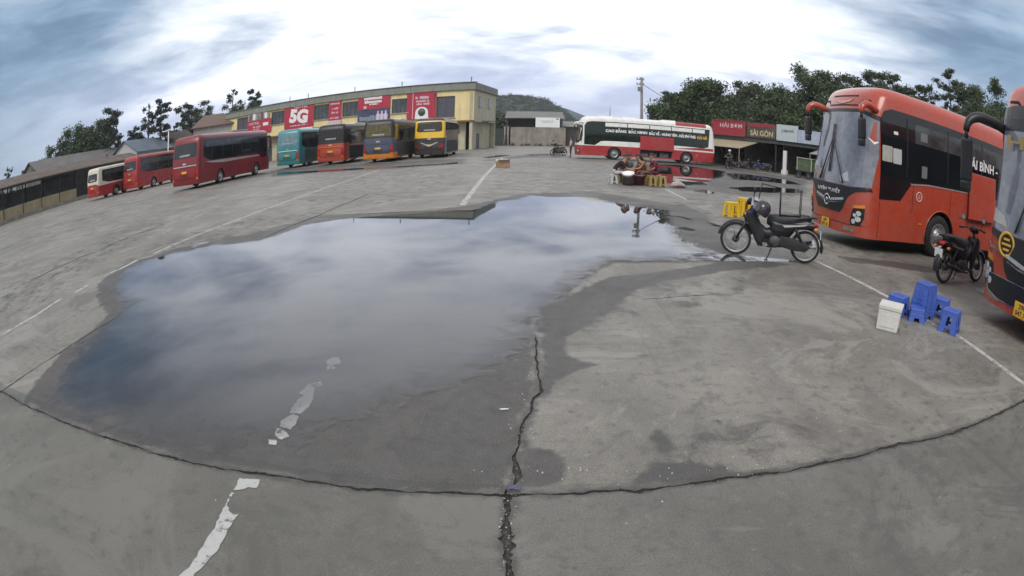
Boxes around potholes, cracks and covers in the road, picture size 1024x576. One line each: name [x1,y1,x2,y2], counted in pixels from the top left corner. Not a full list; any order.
crack [512,336,543,485]
